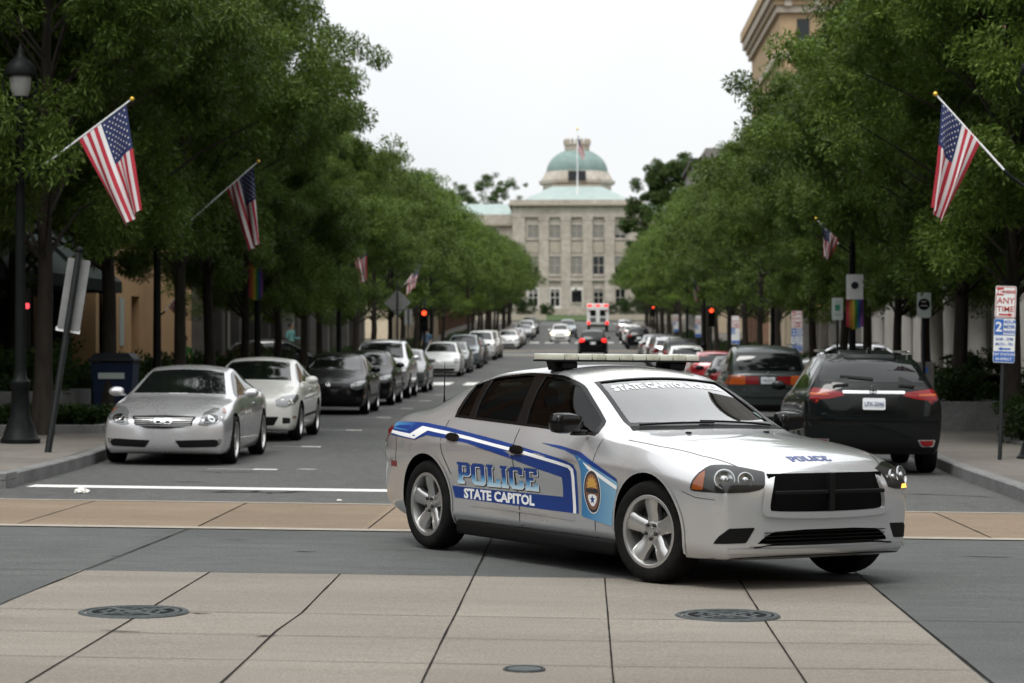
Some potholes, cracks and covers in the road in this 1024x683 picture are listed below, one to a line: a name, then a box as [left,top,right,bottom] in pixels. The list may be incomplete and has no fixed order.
manhole cover [675,609,780,622]
manhole cover [503,665,545,673]
manhole cover [78,605,189,619]
